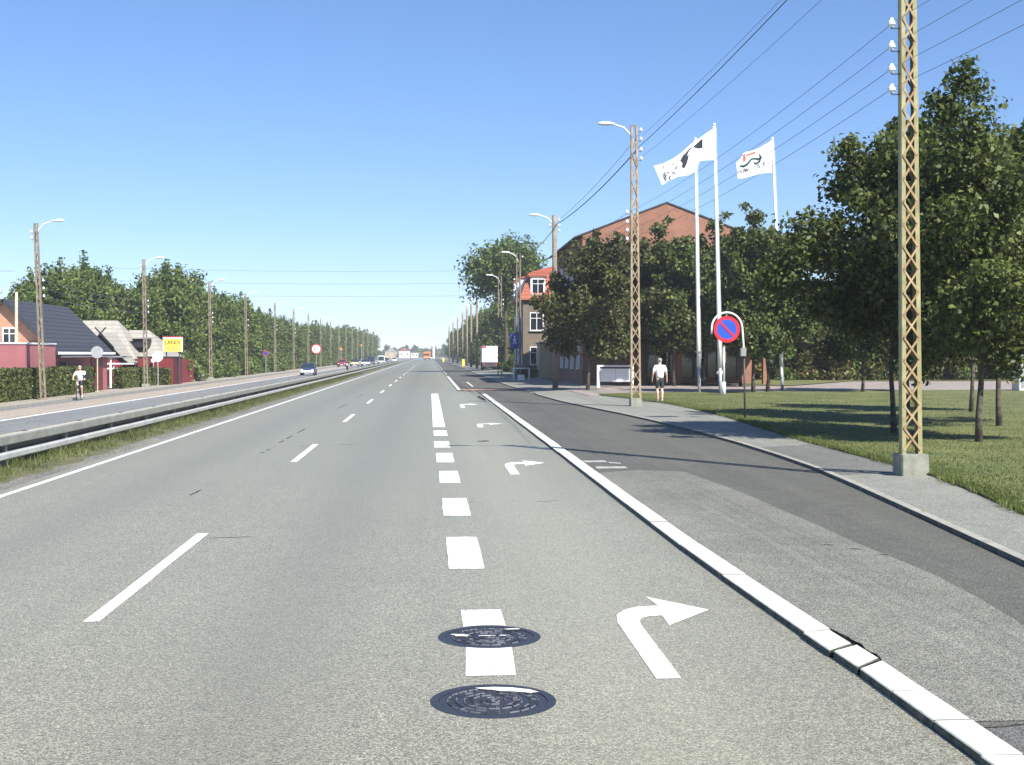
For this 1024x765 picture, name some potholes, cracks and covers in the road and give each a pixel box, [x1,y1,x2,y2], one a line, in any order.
manhole cover [438,626,541,648]
manhole cover [430,684,556,719]
